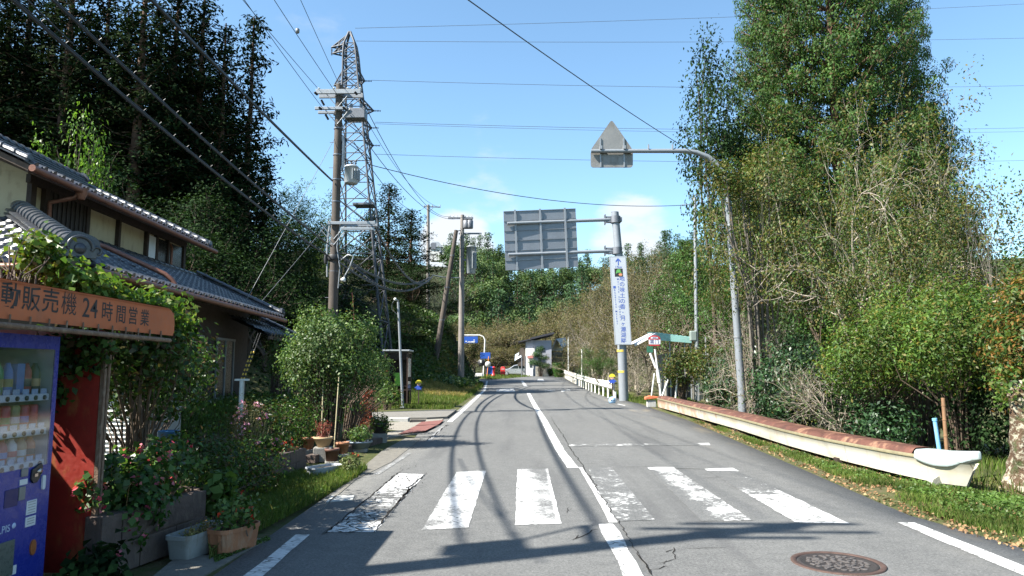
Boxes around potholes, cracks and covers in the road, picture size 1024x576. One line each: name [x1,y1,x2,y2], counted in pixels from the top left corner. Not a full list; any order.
crack [554,423,676,576]
manhole cover [791,551,887,576]
